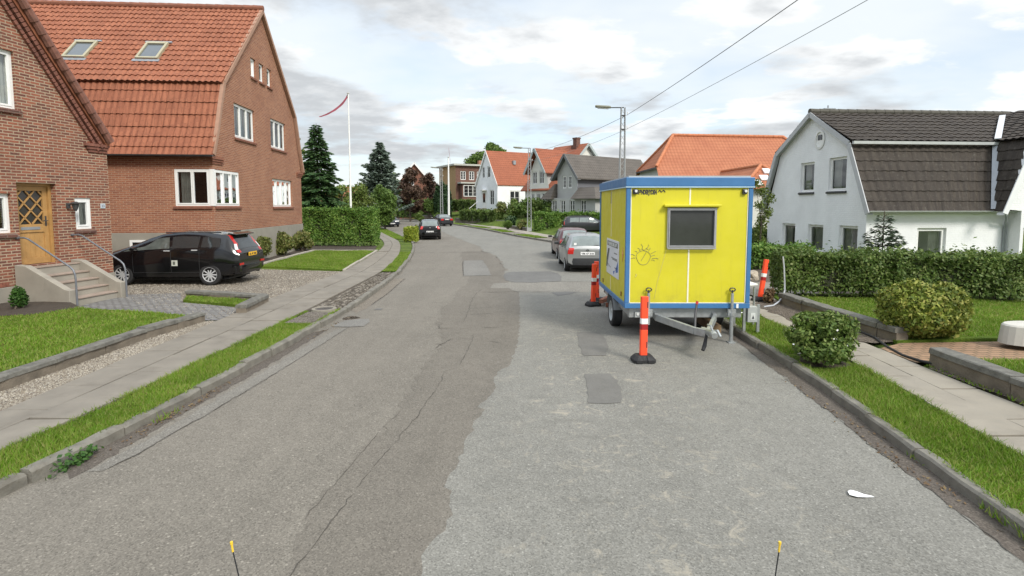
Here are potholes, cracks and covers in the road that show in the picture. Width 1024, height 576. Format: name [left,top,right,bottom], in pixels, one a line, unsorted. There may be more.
crack [290,289,503,576]
